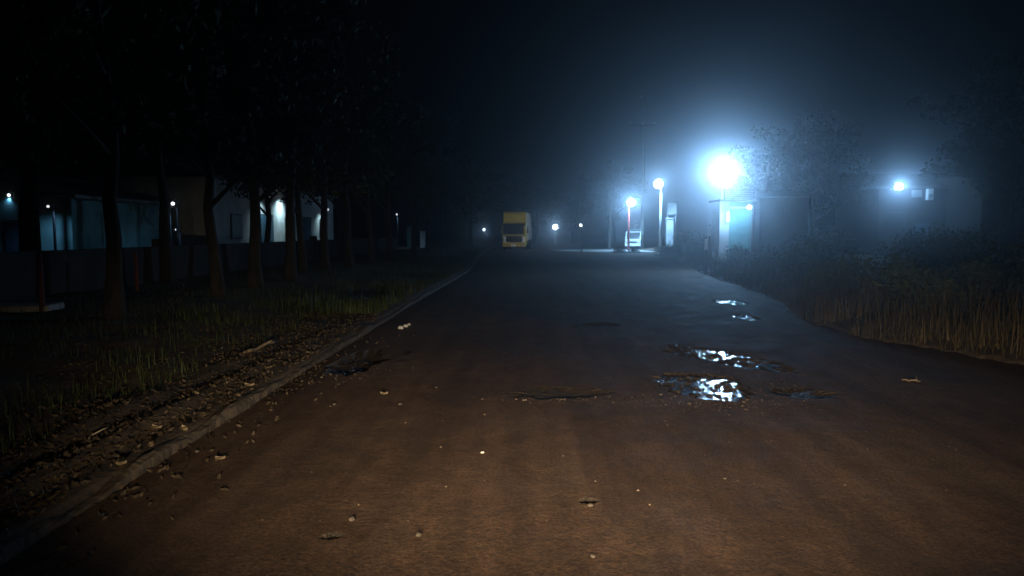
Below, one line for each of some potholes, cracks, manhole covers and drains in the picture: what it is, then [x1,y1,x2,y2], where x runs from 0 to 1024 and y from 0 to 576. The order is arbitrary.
pothole [506,386,620,400]
pothole [651,372,756,402]
pothole [763,388,844,399]
pothole [662,344,801,373]
pothole [323,349,392,376]
